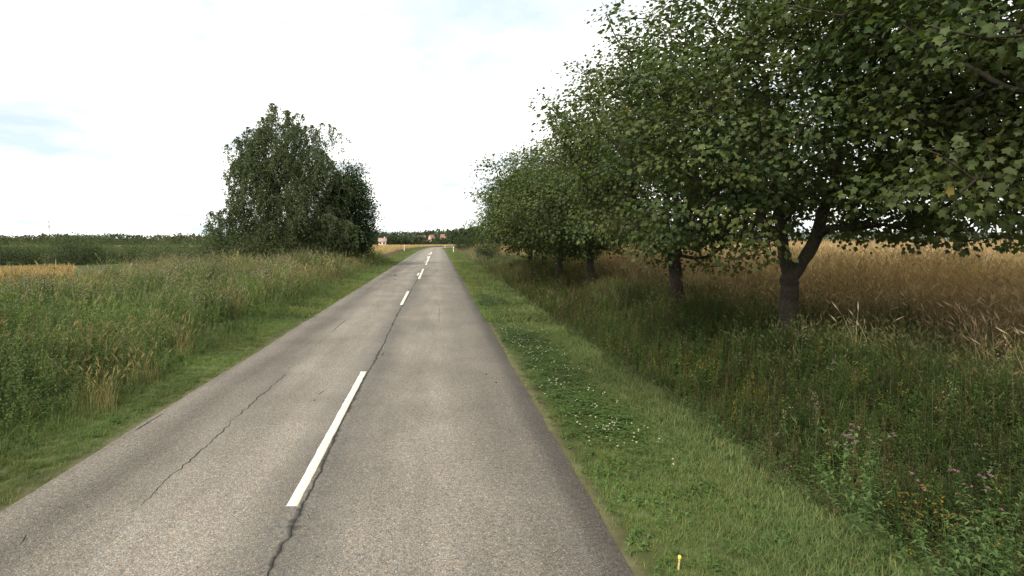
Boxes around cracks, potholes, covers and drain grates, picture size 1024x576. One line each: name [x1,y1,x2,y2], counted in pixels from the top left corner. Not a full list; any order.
crack [133,374,286,511]
